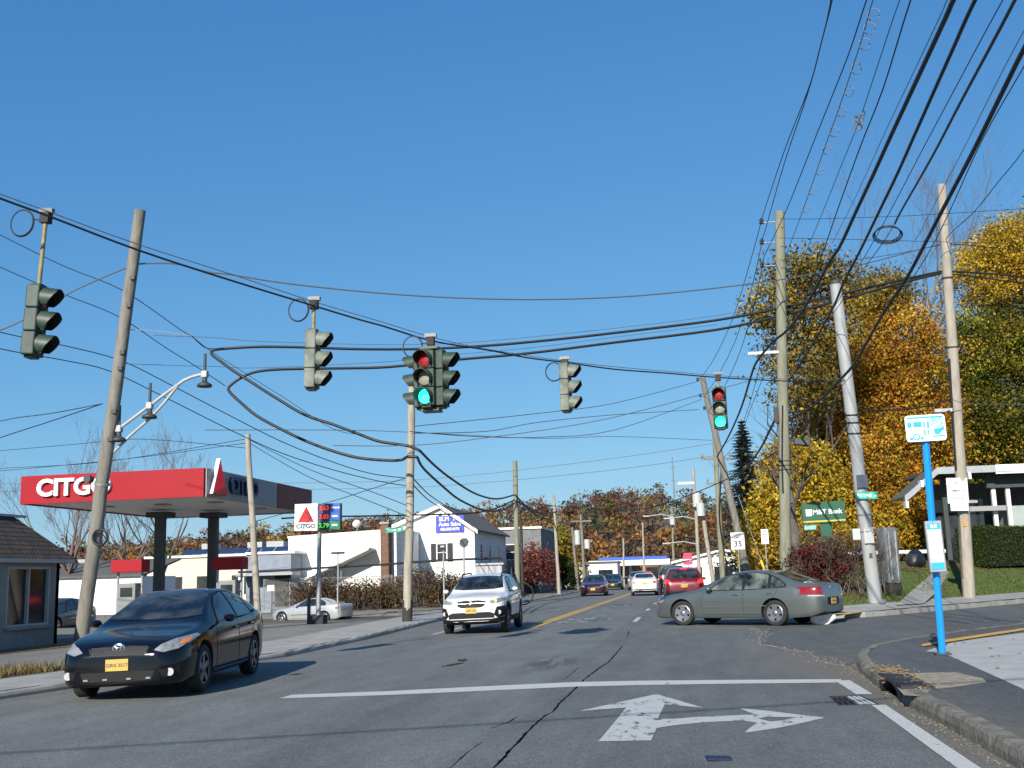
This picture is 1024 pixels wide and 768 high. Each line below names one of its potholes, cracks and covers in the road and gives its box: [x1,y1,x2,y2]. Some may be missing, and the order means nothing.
crack [450,631,630,768]
drain grate [878,673,936,703]
drain grate [829,695,880,706]
